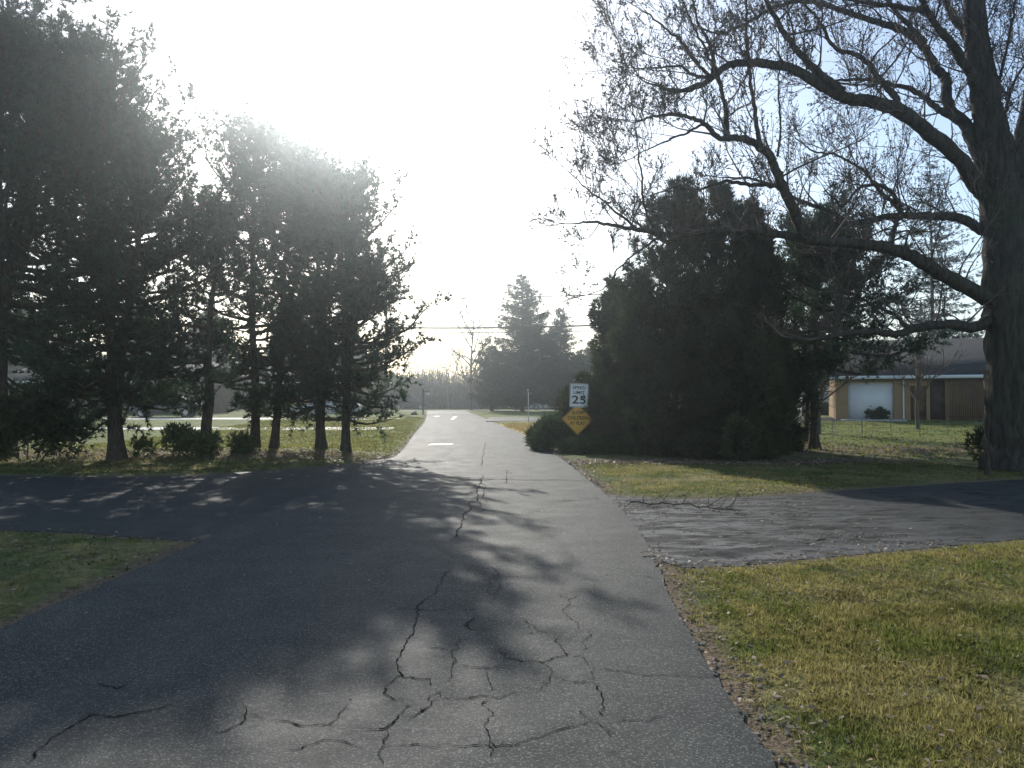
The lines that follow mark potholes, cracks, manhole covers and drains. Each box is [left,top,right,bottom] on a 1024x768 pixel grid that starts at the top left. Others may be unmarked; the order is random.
crack [207,441,698,763]
crack [19,702,178,768]
